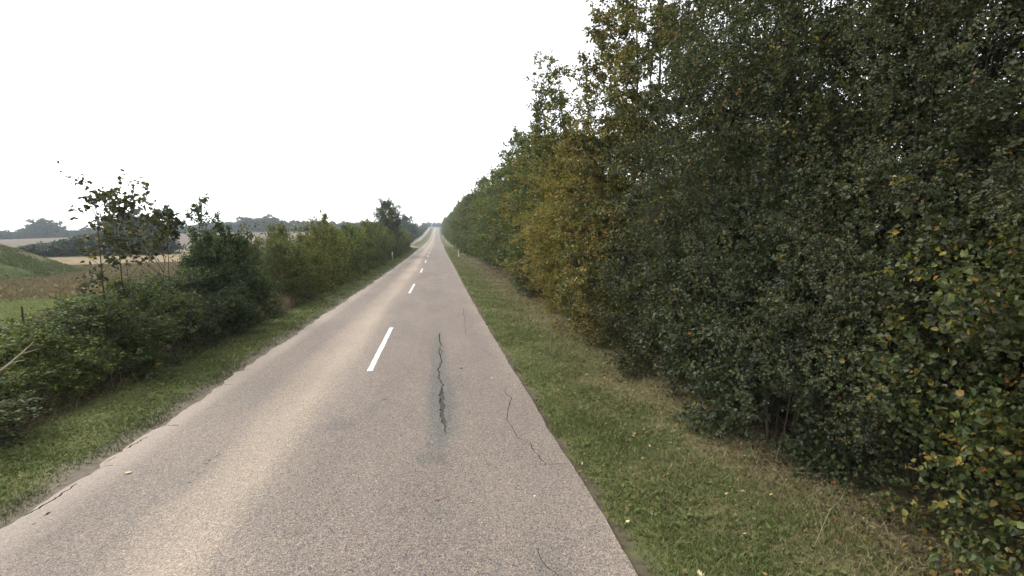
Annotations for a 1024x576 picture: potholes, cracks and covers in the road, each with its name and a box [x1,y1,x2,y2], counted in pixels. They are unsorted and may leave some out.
crack [437,333,447,435]
